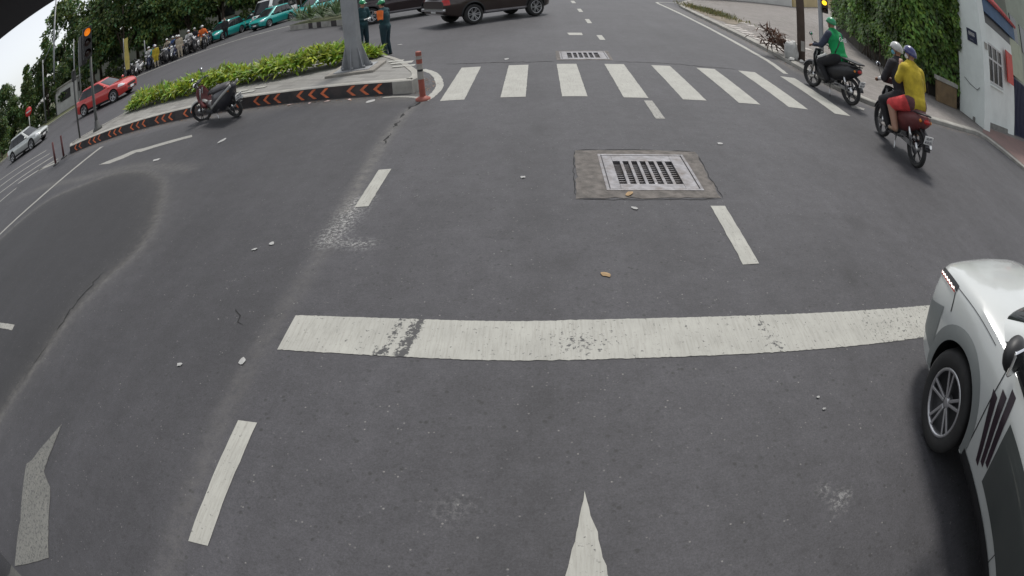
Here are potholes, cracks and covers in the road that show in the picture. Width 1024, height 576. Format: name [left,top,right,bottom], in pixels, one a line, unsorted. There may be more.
drain grate [555,51,613,60]
drain grate [574,150,721,199]
crack [383,102,420,144]
crack [35,274,101,362]
